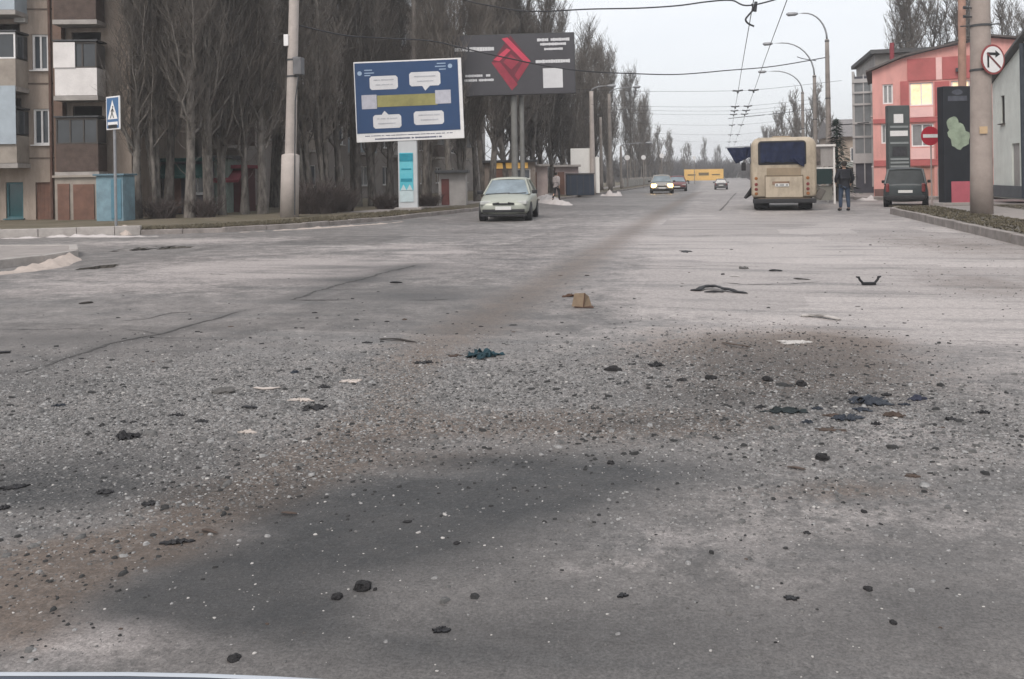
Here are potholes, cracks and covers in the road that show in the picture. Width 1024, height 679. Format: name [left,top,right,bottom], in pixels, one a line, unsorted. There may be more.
crack [10,310,245,373]
crack [291,265,415,300]
